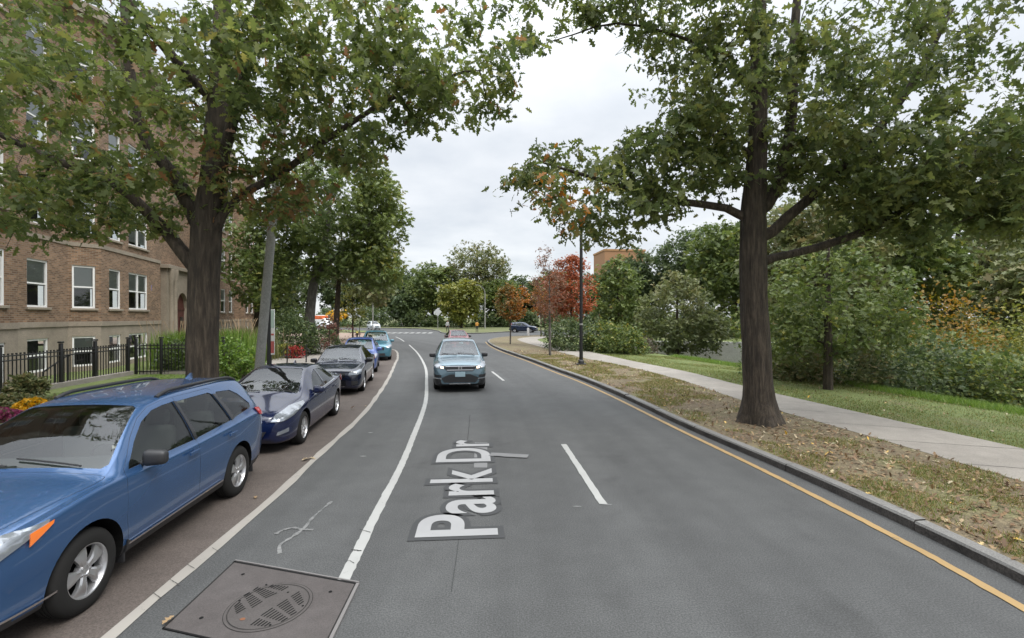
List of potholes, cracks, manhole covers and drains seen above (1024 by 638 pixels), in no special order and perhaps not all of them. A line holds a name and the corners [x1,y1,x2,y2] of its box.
manhole cover [222,583,313,632]
